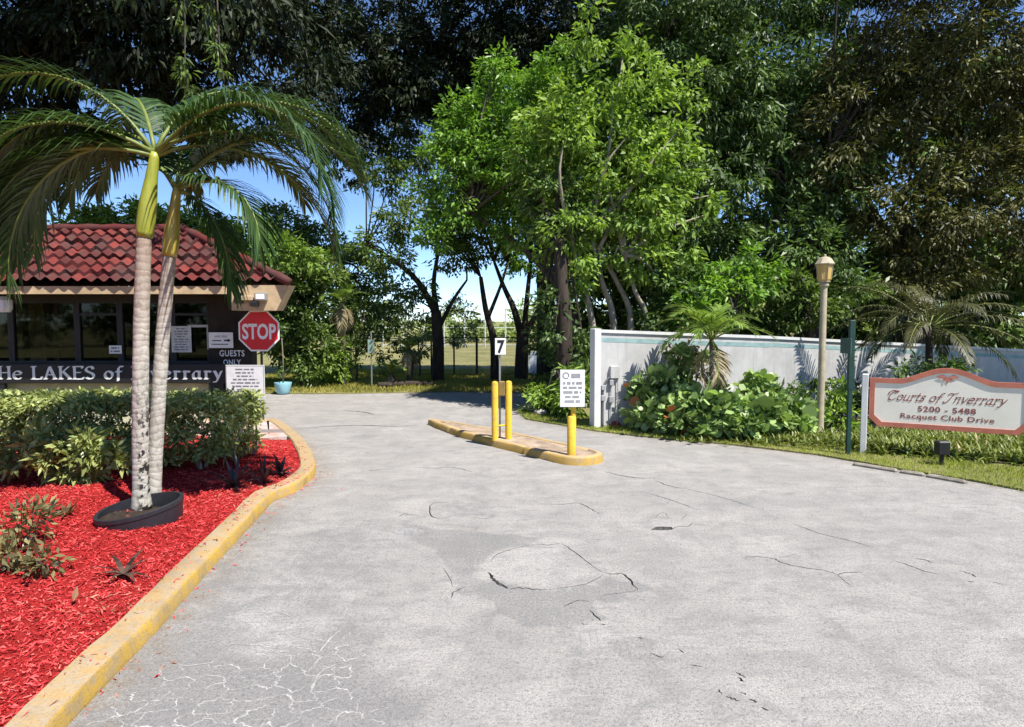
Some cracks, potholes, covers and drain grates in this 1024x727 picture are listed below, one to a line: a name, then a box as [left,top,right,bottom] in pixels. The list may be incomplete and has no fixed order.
crack [611,473,745,530]
crack [487,543,638,625]
crack [745,554,856,583]
crack [718,672,769,711]
